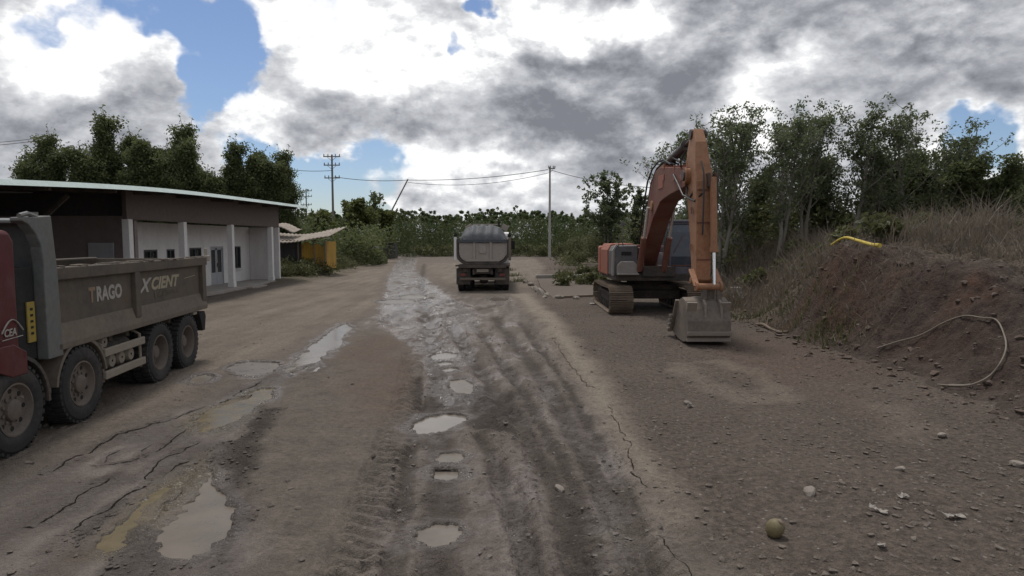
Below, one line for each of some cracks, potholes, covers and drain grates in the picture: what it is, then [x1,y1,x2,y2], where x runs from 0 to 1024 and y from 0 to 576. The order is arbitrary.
pothole [420,462,471,486]
crack [643,530,710,576]
pothole [422,448,476,470]
crack [24,379,268,536]
pothole [439,377,482,396]
crack [547,335,660,491]
pothole [422,351,464,361]
pothole [77,466,212,561]
pothole [219,360,292,378]
pothole [401,411,478,437]
pothole [122,464,255,569]
pothole [179,386,283,436]
